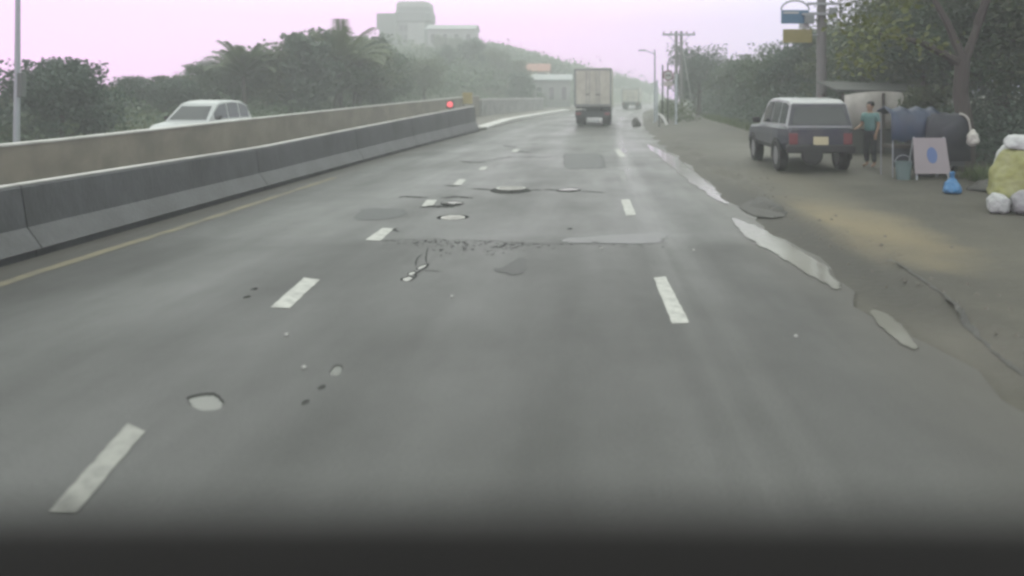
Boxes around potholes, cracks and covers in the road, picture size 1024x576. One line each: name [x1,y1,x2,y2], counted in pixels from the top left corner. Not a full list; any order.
crack [412,248,433,280]
pothole [187,393,225,411]
pothole [739,196,788,218]
manhole cover [490,186,531,194]
pothole [329,365,343,376]
